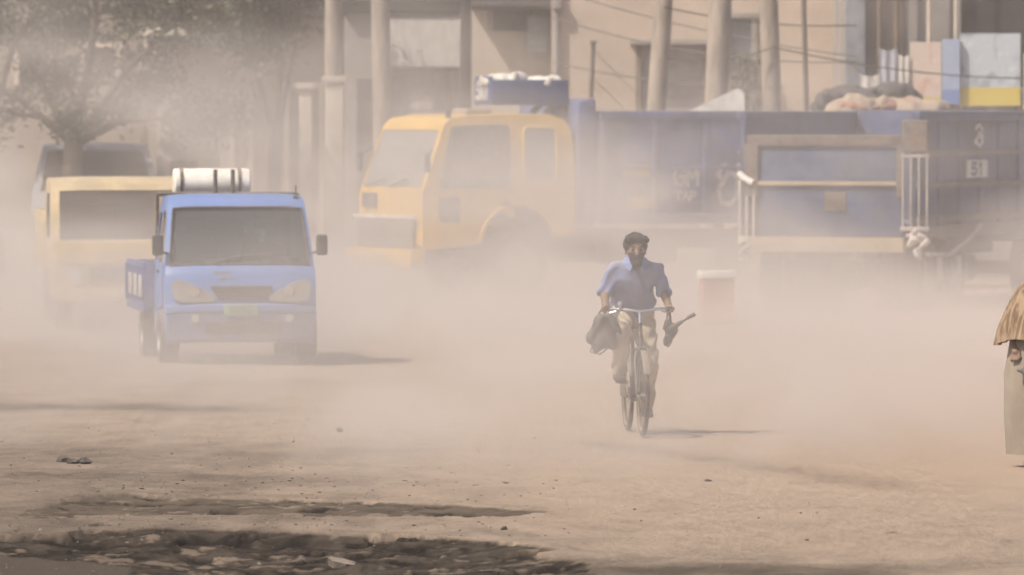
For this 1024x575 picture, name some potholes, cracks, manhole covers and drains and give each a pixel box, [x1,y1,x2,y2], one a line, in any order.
pothole [0,525,614,575]
pothole [15,491,560,519]
